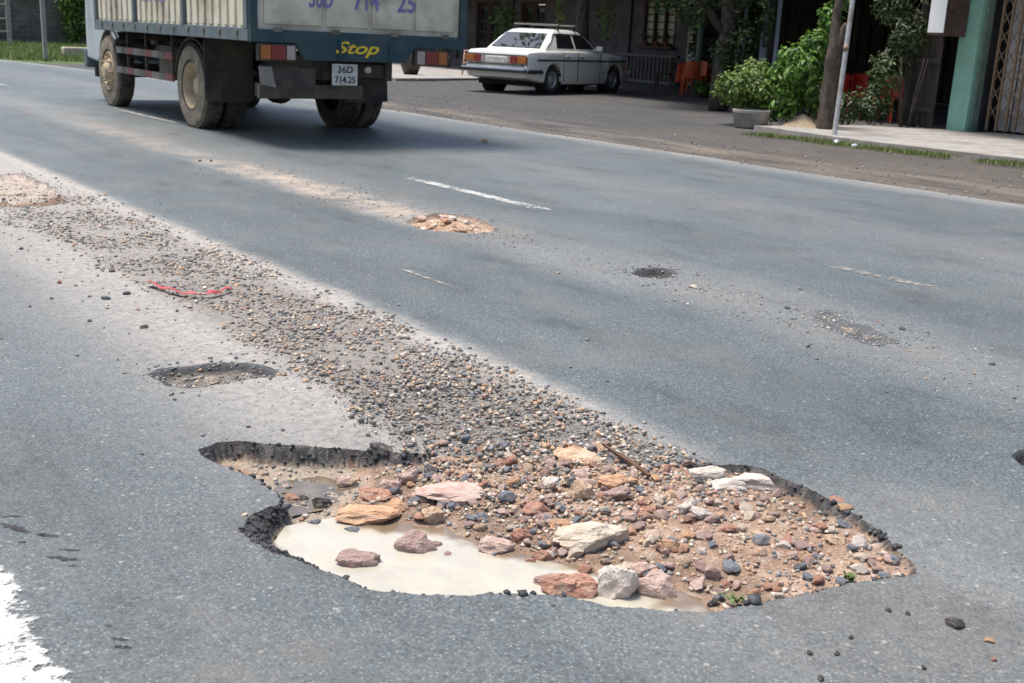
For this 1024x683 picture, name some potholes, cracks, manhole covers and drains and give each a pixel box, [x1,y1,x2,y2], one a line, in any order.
crack [0,515,81,567]
pothole [198,440,918,612]
pothole [407,213,497,233]
pothole [146,362,280,389]
pothole [0,172,72,207]
pothole [630,267,679,279]
